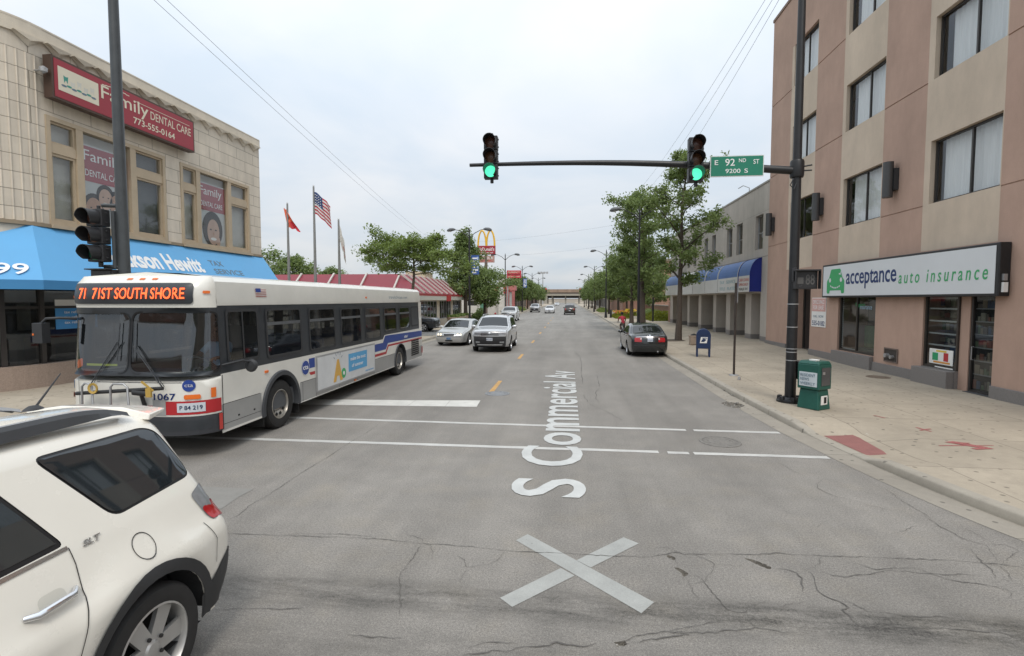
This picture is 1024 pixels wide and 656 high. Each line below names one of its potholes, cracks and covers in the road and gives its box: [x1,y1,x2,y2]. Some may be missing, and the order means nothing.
manhole cover [699,436,742,447]
crack [464,641,595,655]
crack [236,495,1020,636]
crack [621,616,781,643]
